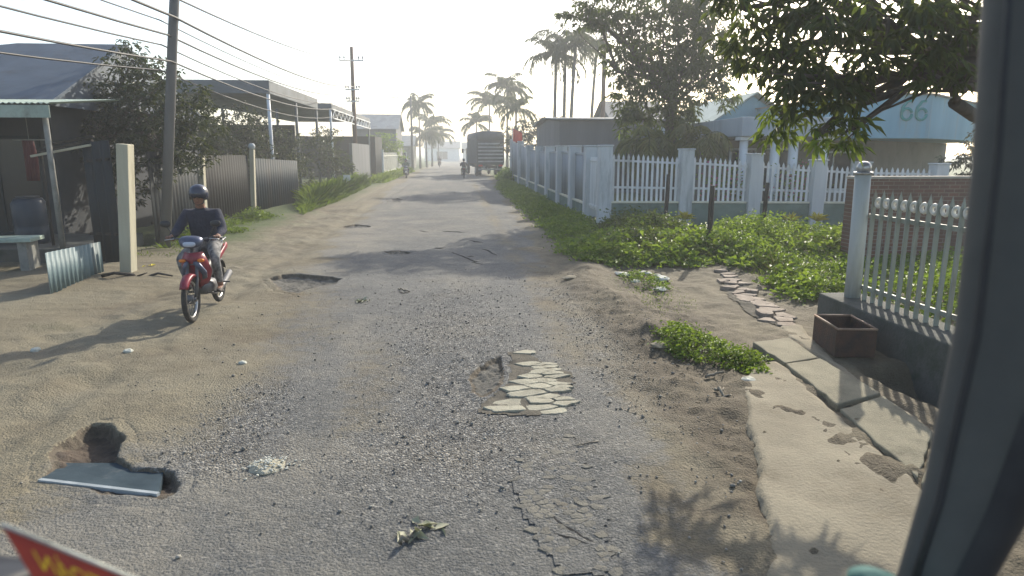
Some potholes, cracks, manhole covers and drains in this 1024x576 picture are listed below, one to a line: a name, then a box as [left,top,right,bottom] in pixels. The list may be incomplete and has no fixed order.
pothole [262,273,348,295]
pothole [457,353,512,403]
crack [422,231,498,264]
pothole [27,419,195,509]
crack [478,351,620,575]
